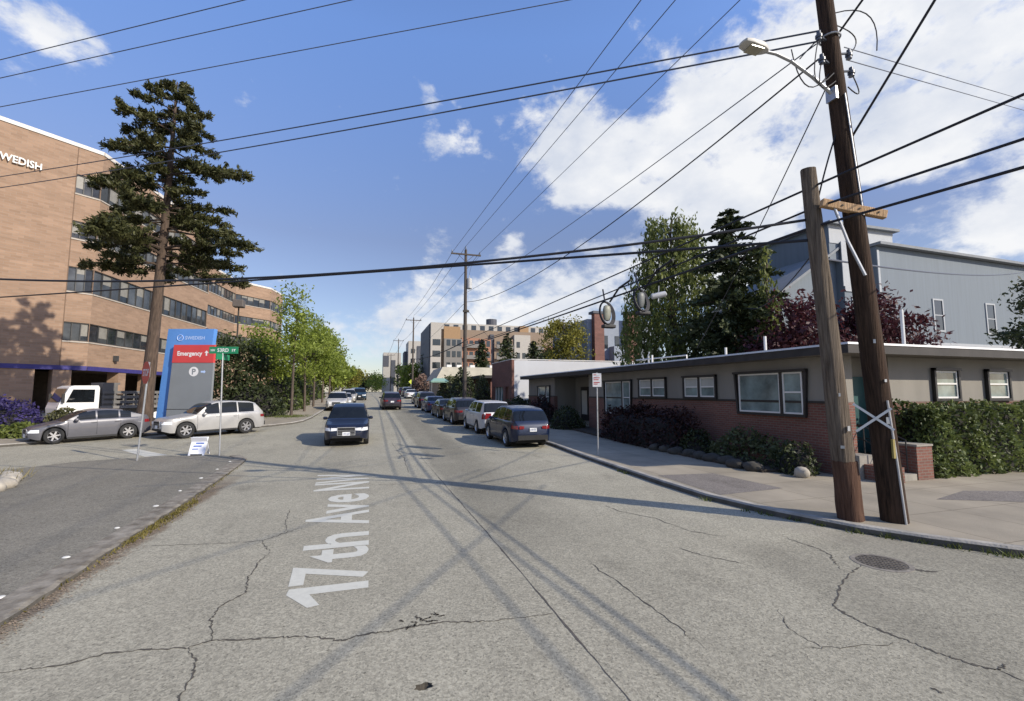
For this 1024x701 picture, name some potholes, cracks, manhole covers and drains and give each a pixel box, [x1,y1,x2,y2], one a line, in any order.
manhole cover [850,553,915,573]
crack [9,511,553,701]
pothole [414,682,433,691]
crack [590,561,704,647]
crack [777,565,1024,681]
